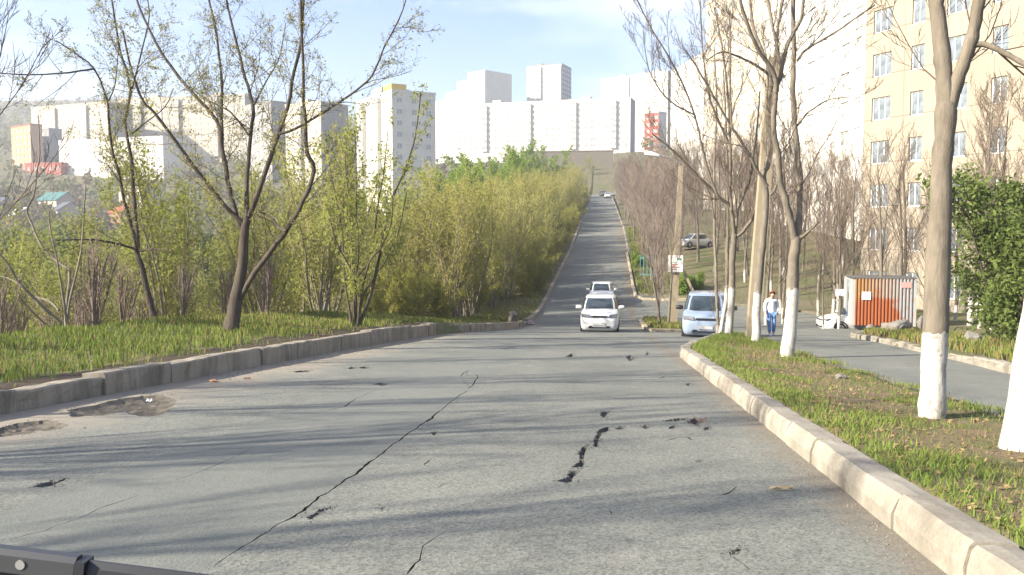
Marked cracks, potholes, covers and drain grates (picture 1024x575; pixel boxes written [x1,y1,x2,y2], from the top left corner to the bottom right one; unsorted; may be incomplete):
crack [209,370,478,569]
pothole [67,395,178,417]
pothole [0,420,68,437]
pothole [33,478,67,487]
